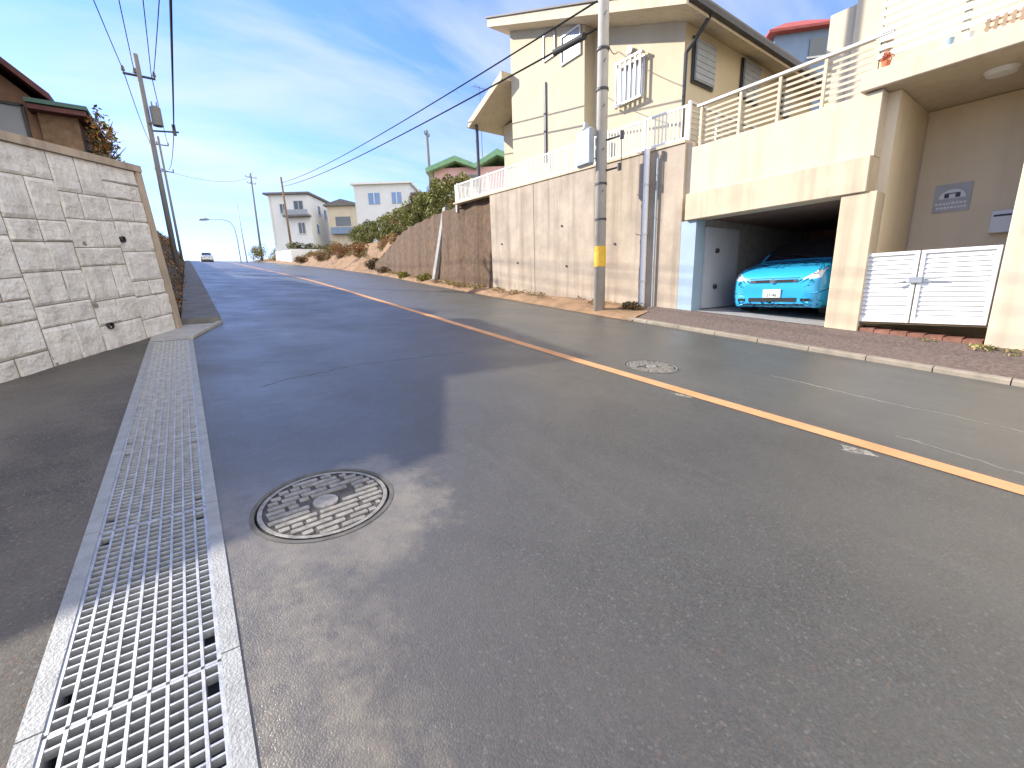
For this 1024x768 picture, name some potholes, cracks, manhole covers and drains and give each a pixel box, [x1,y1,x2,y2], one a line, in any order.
crack [775,376,1023,432]
drain grate [123,397,198,450]
drain grate [33,661,232,768]
crack [259,352,464,388]
drain grate [100,436,206,534]
drain grate [144,353,192,376]
drain grate [136,371,194,405]
drain grate [42,506,221,740]
manhole cover [249,469,393,544]
crack [897,436,1024,474]
drain grate [150,339,190,356]
manhole cover [623,360,681,374]
